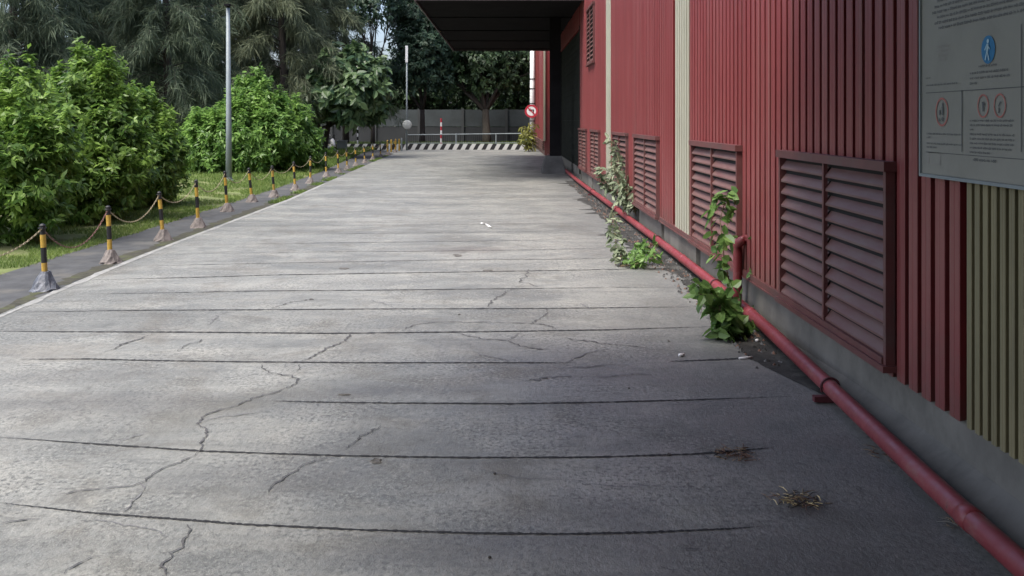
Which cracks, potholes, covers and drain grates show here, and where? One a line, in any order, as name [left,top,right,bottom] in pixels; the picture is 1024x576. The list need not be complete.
crack [65,333,351,574]
crack [403,270,661,381]
crack [268,425,381,492]
